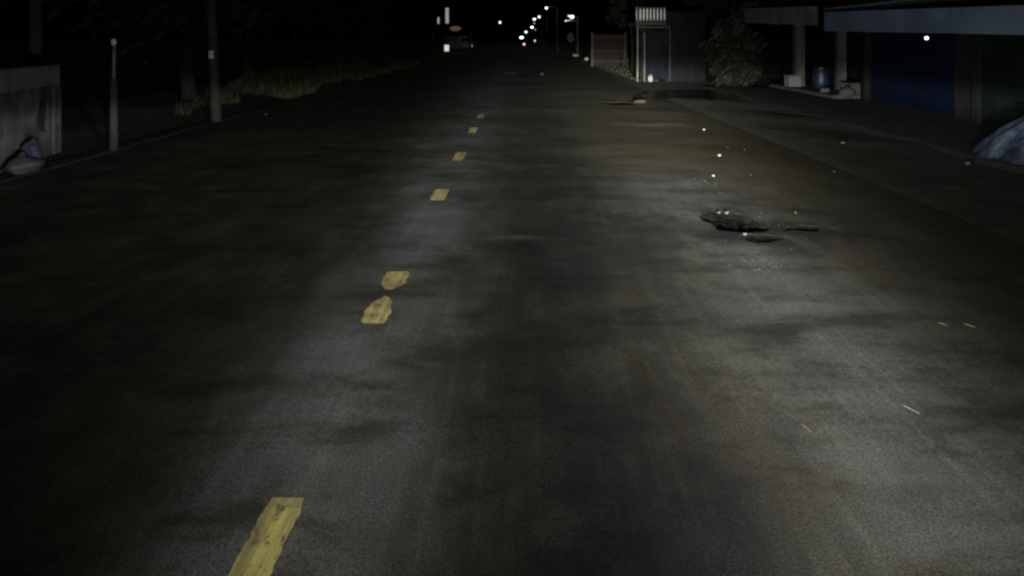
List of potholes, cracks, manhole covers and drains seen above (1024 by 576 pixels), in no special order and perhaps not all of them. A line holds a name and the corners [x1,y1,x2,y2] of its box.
pothole [740,234,787,243]
pothole [697,209,771,233]
